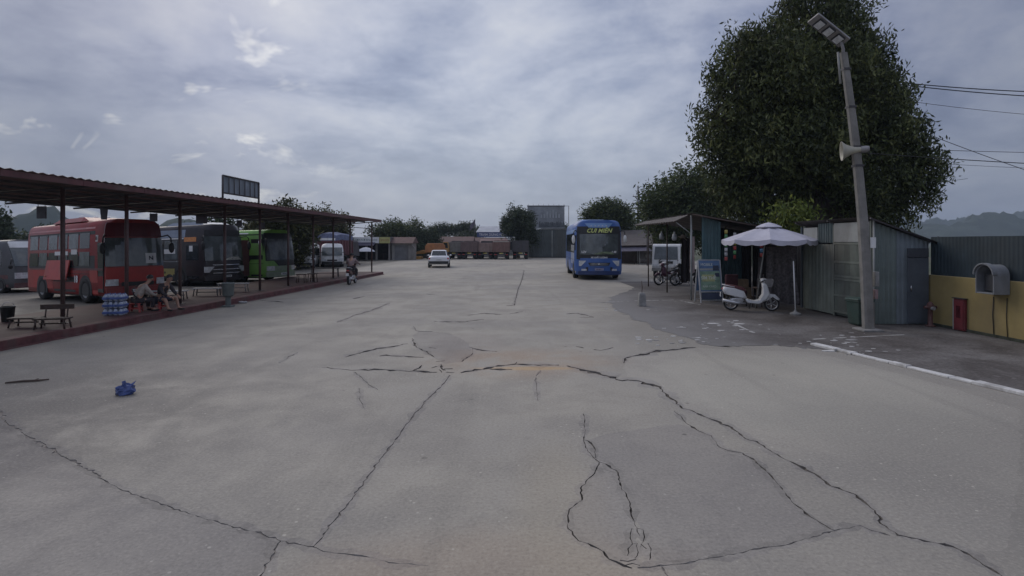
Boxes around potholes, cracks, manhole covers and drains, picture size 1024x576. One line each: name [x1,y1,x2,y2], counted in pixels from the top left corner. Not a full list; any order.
crack [568,346,1002,576]
crack [259,542,280,576]
crack [347,272,541,409]
